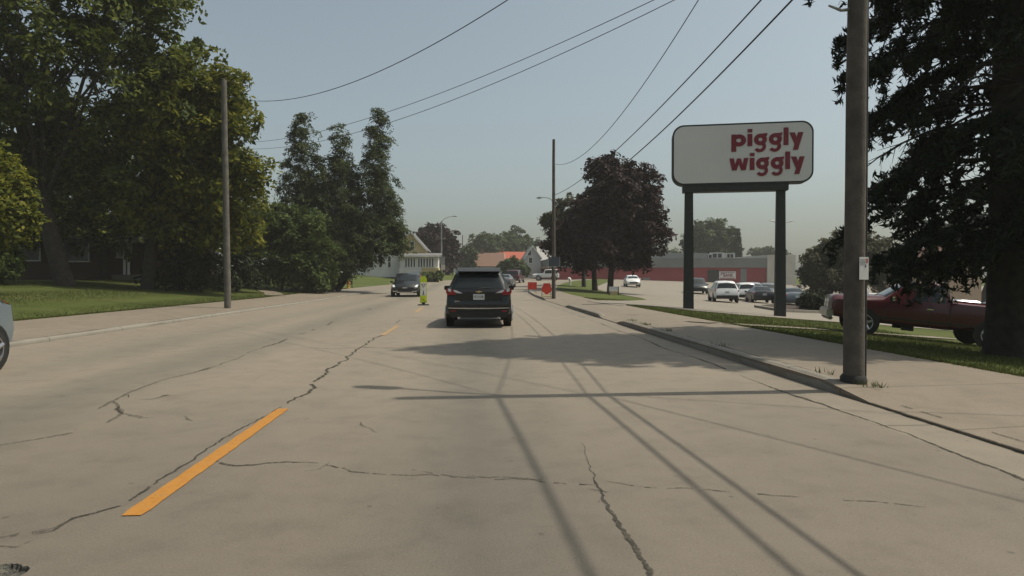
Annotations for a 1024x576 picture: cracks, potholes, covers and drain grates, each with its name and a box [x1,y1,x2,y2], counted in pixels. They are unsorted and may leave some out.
crack [0,321,925,547]
crack [582,443,654,576]
pothole [0,563,30,576]
